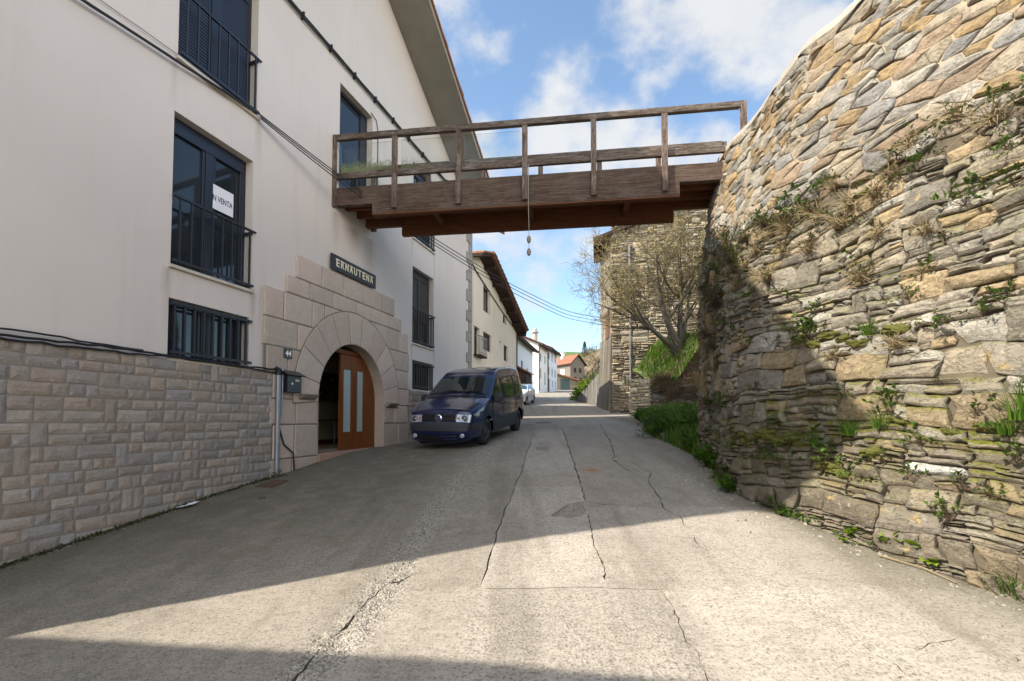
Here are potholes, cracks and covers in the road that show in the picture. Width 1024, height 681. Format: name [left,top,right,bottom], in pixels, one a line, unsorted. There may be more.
crack [664,594,708,681]
crack [292,573,417,681]
crack [562,417,708,579]
crack [480,434,534,586]
